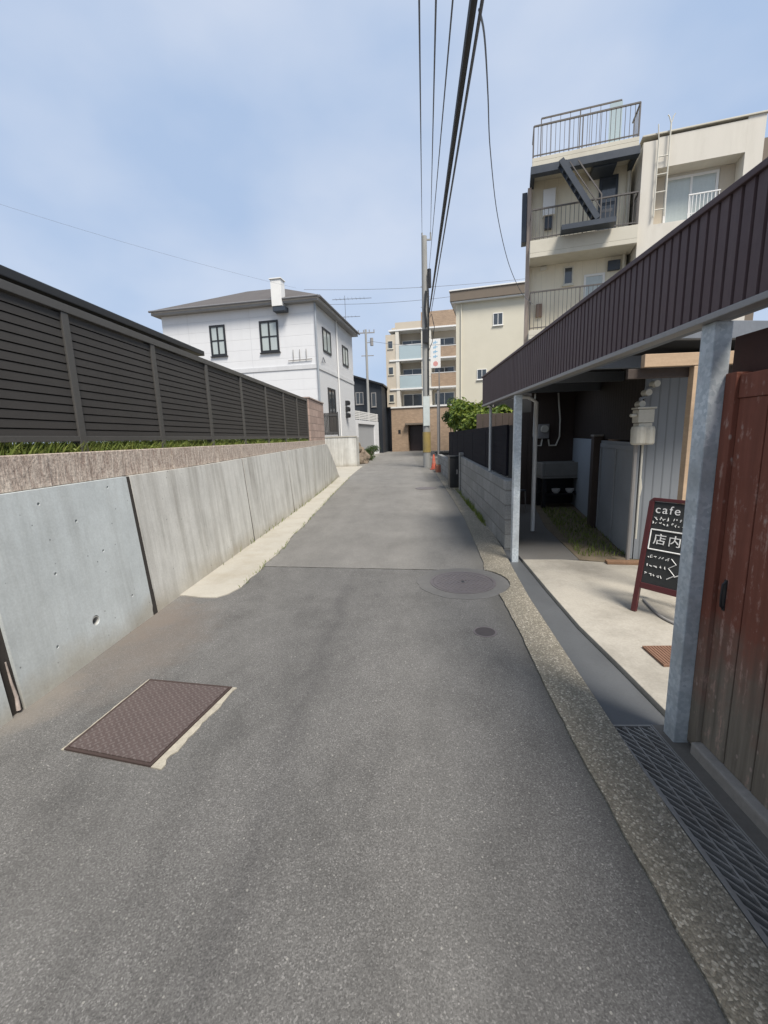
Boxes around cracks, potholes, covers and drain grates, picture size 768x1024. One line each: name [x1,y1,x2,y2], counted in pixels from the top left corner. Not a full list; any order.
drain grate [614,724,768,949]
manhole cover [61,679,237,770]
utility cover [473,627,497,637]
manhole cover [417,568,510,600]
